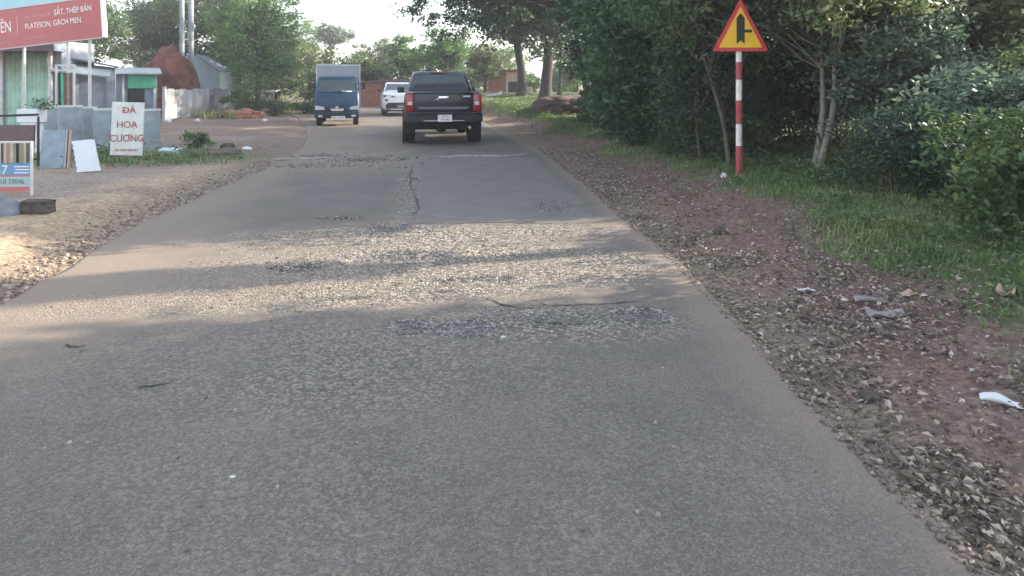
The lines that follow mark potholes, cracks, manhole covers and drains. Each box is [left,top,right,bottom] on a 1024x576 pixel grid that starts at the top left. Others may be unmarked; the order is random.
pothole [420,319,514,338]
crack [444,297,634,312]
pothole [606,306,675,327]
pothole [527,313,607,325]
